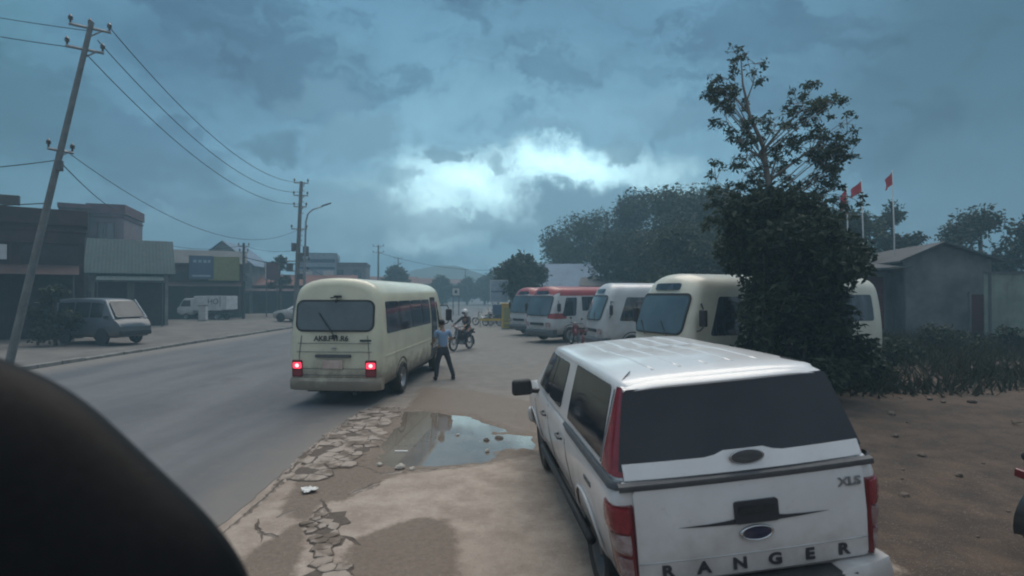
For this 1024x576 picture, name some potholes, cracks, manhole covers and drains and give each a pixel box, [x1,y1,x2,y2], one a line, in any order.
pothole [360,407,540,473]
crack [254,406,449,576]
